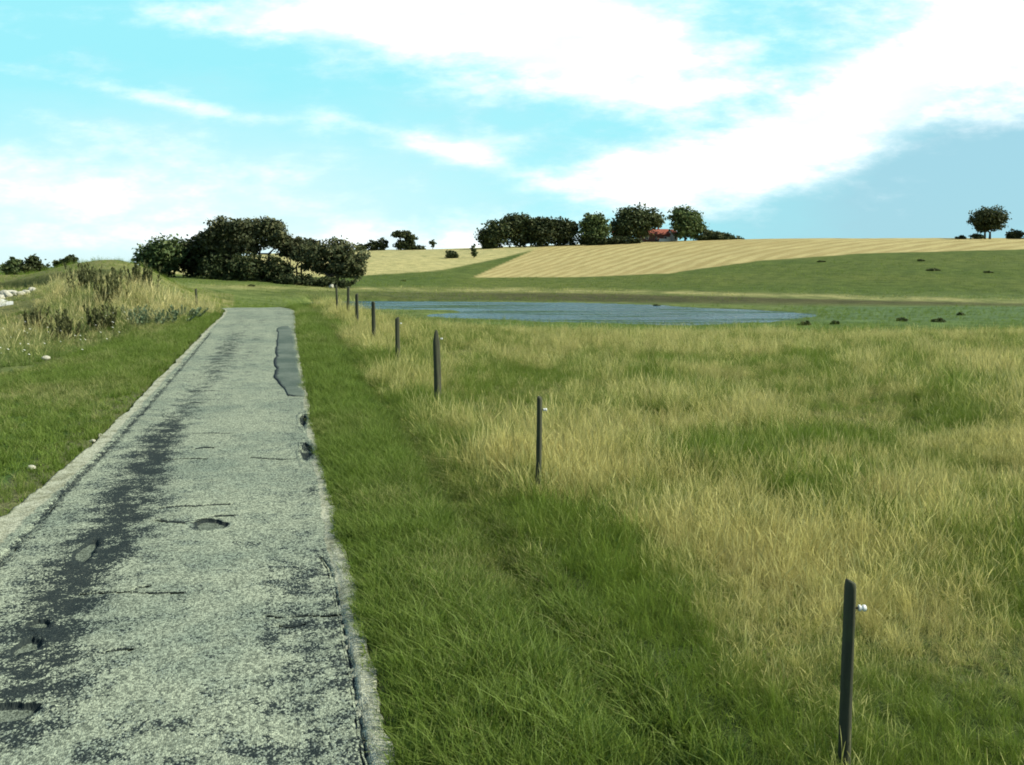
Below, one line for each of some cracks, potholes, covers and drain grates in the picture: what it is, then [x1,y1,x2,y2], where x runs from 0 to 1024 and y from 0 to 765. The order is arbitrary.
pothole [63,533,108,570]
pothole [0,630,55,664]
pothole [296,410,310,433]
pothole [296,436,319,468]
pothole [0,698,59,728]
pothole [14,616,61,632]
crack [80,585,184,595]
pothole [185,516,237,532]
crack [0,333,234,568]
crack [267,557,372,765]
